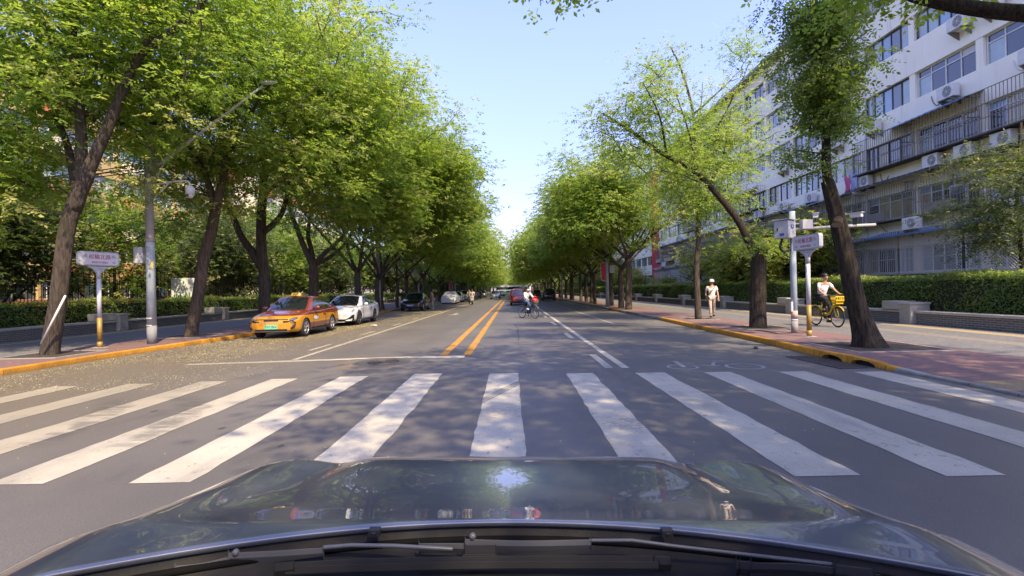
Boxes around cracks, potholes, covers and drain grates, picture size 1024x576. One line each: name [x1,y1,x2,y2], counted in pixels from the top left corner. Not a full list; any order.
drain grate [786,356,868,369]
